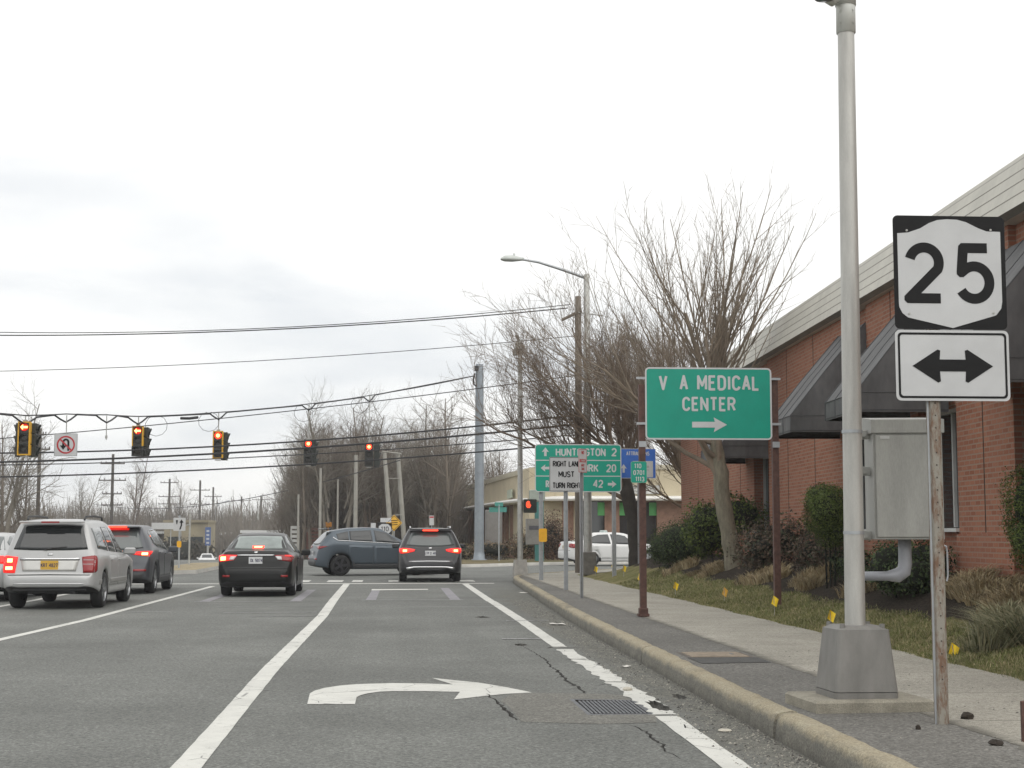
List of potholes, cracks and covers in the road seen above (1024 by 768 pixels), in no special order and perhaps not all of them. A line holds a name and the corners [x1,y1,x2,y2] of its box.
crack [523,646,608,693]
crack [488,695,518,720]
crack [617,724,680,759]
